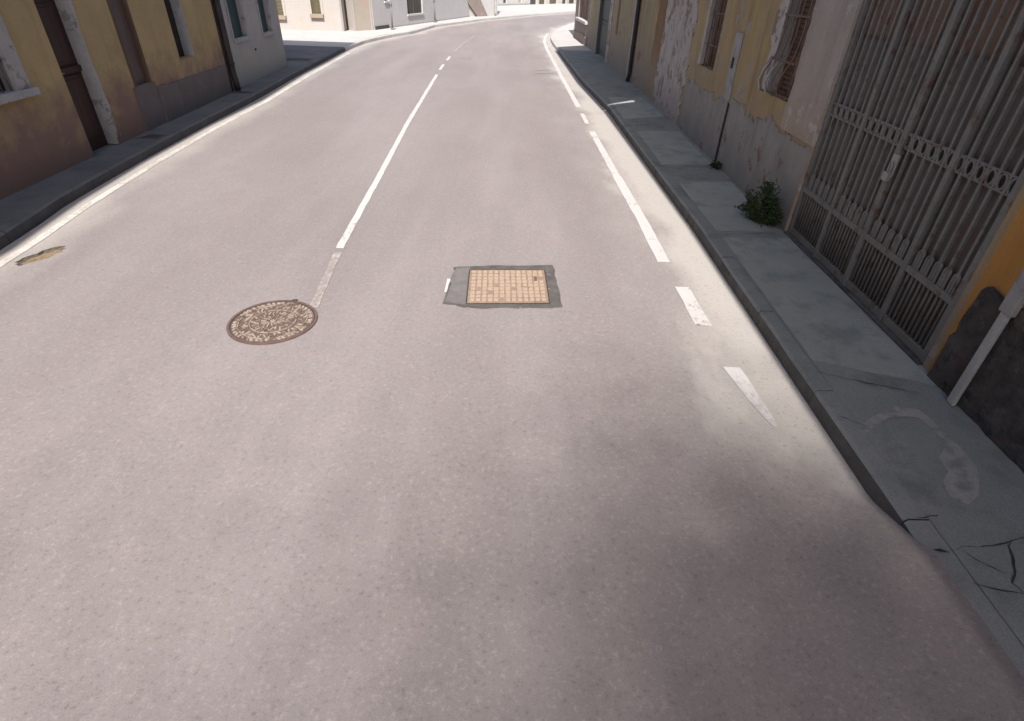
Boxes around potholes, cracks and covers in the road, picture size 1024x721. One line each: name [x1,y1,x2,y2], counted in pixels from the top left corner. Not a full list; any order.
manhole cover [442,265,563,309]
manhole cover [226,299,318,345]
crack [932,537,1024,594]
